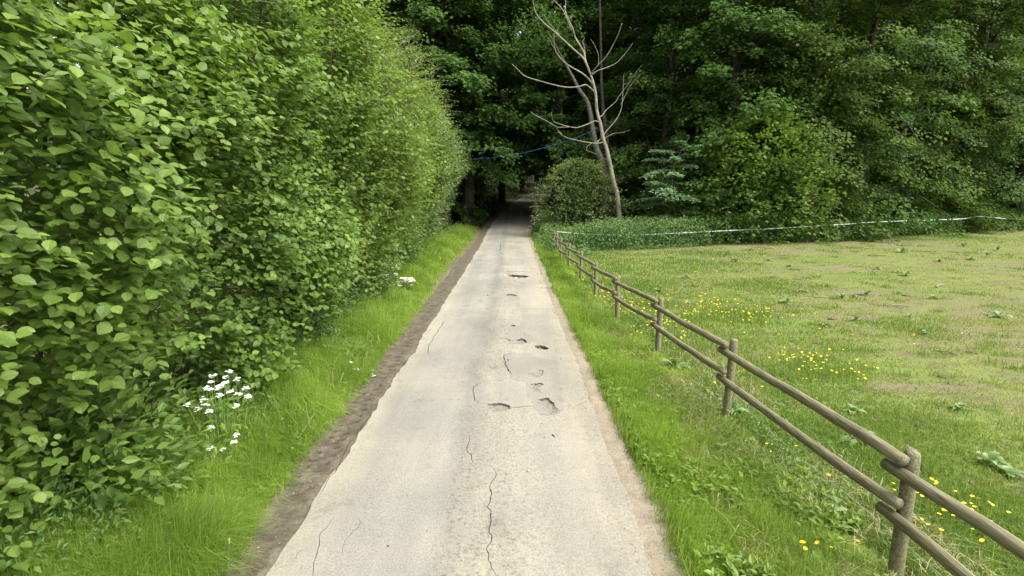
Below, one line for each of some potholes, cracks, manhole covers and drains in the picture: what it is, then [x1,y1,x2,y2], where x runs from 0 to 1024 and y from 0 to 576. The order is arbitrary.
pothole [535,398,560,414]
pothole [486,403,512,412]
crack [295,517,359,573]
crack [486,477,496,575]
